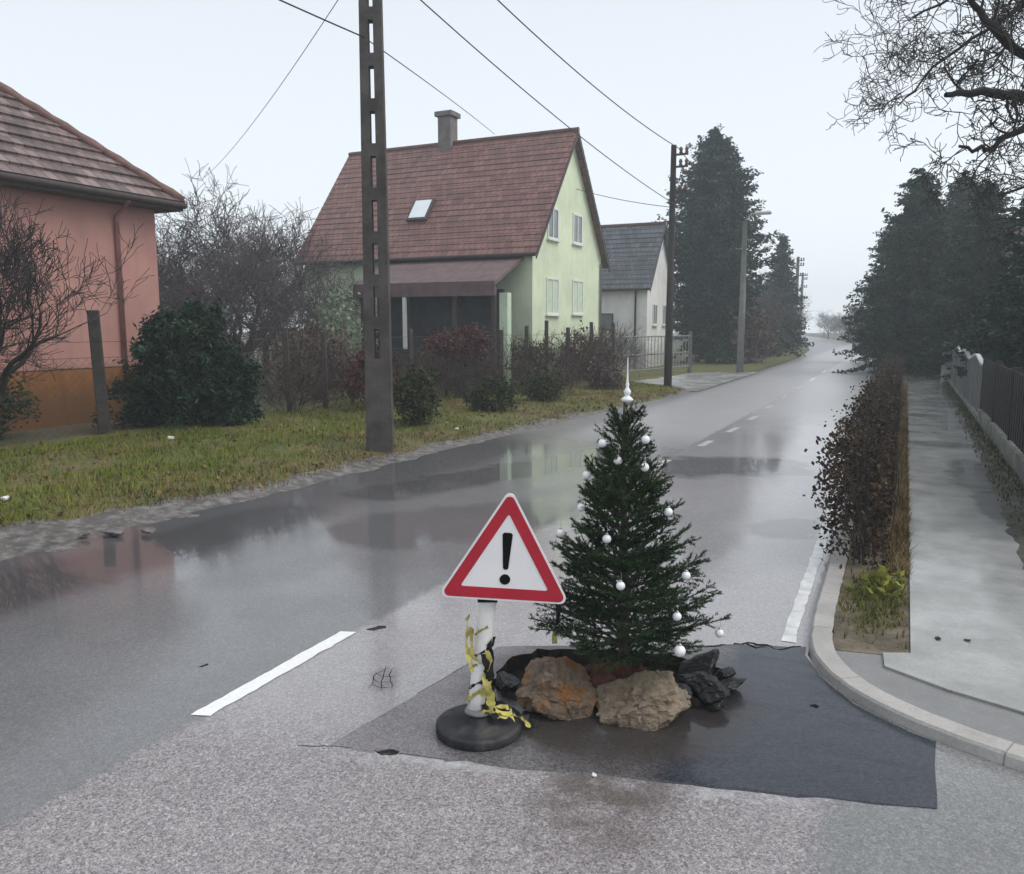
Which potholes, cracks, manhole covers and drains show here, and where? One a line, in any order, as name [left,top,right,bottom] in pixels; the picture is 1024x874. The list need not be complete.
crack [369,666,394,691]
